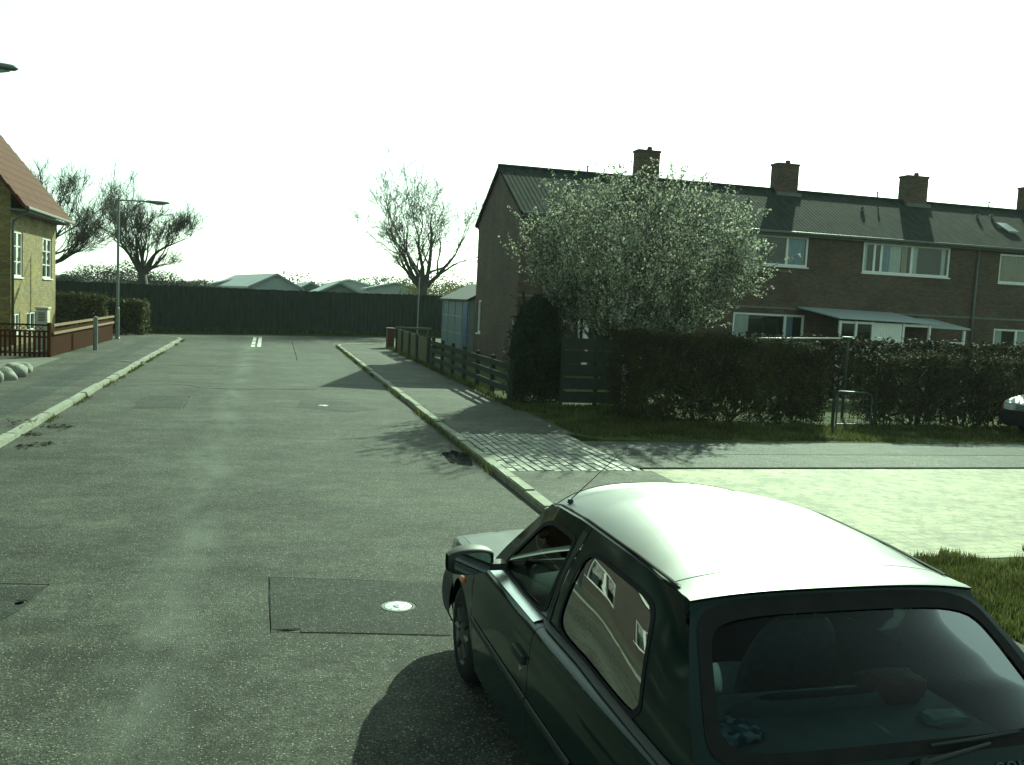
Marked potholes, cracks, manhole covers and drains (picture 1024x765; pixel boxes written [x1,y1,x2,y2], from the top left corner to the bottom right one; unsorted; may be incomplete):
manhole cover [381,600,415,612]
pothole [442,450,473,466]
